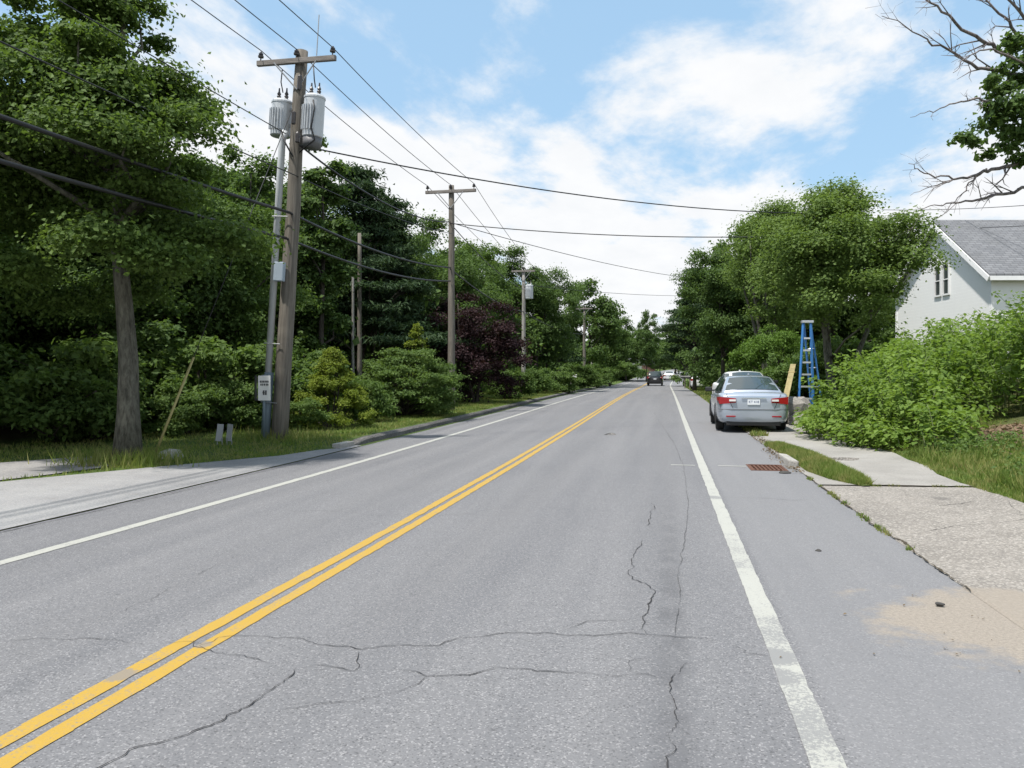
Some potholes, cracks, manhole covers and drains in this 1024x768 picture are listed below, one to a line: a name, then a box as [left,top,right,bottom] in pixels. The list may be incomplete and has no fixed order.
crack [10,503,763,768]
